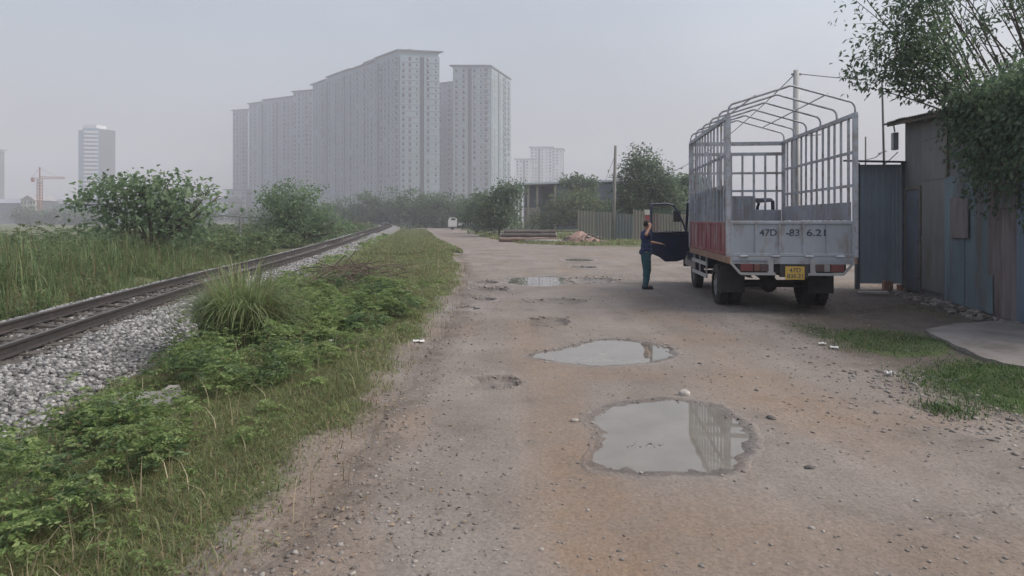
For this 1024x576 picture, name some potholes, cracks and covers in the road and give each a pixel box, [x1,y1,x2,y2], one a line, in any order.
pothole [522,337,684,368]
pothole [519,297,593,305]
pothole [579,394,765,482]
pothole [457,373,528,392]
pothole [522,316,576,328]
pothole [503,276,582,287]
